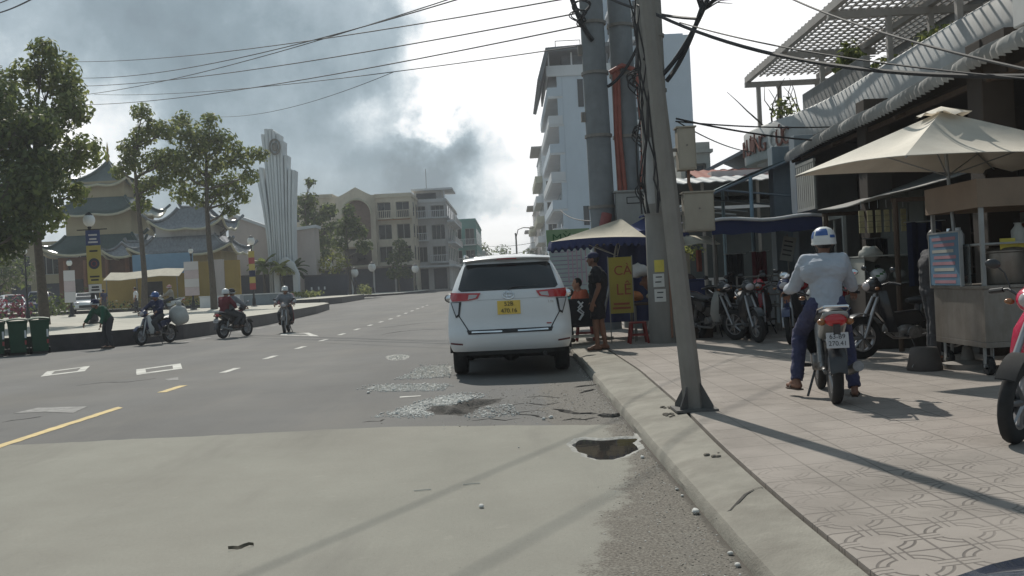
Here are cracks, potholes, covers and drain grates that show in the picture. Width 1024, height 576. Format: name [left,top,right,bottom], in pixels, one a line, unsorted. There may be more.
crack [716,489,754,519]
crack [473,384,598,421]
pothole [566,433,645,460]
pothole [426,398,504,417]
